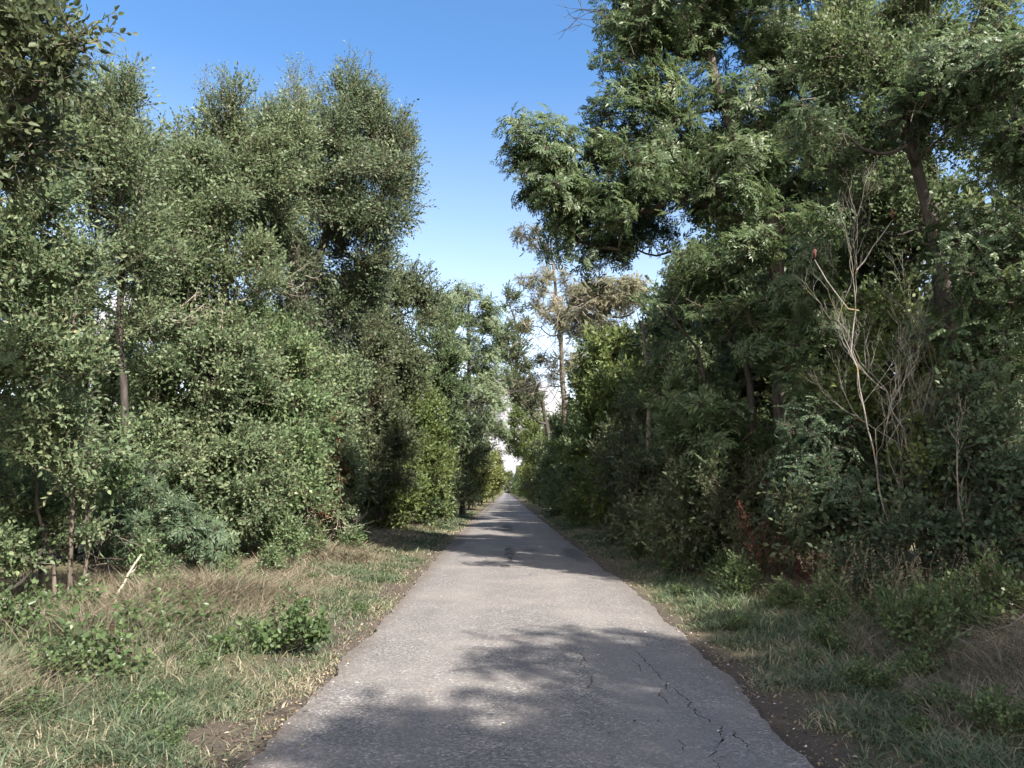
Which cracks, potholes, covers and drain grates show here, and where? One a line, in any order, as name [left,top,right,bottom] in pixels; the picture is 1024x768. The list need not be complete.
crack [618,631,756,768]
